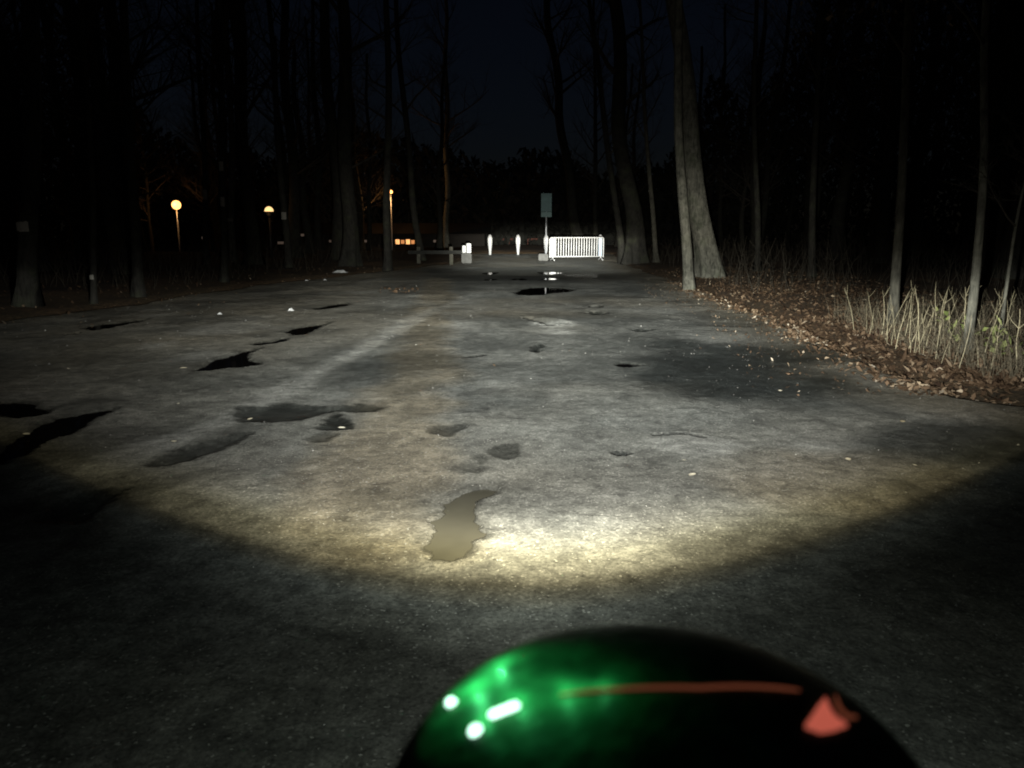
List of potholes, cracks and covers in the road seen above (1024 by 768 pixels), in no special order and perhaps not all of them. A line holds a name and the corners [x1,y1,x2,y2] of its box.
pothole [486,442,524,460]
pothole [416,484,509,564]
pothole [527,343,548,353]
pothole [143,431,257,468]
pothole [313,412,358,432]
pothole [79,317,155,331]
pothole [509,286,581,296]
pothole [0,406,126,465]
pothole [425,422,477,437]
crack [649,430,708,439]
pothole [0,400,61,419]
pothole [304,302,353,310]
